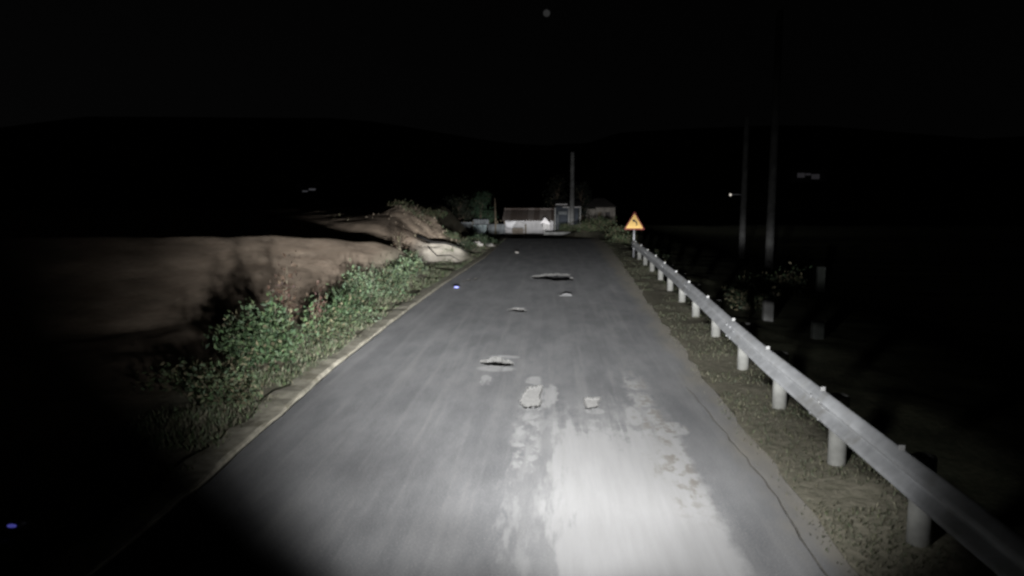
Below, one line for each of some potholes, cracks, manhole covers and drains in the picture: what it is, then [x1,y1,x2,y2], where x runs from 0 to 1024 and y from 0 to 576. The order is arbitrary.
pothole [583,397,601,410]
pothole [530,273,574,281]
pothole [480,356,515,366]
pothole [519,384,543,409]
